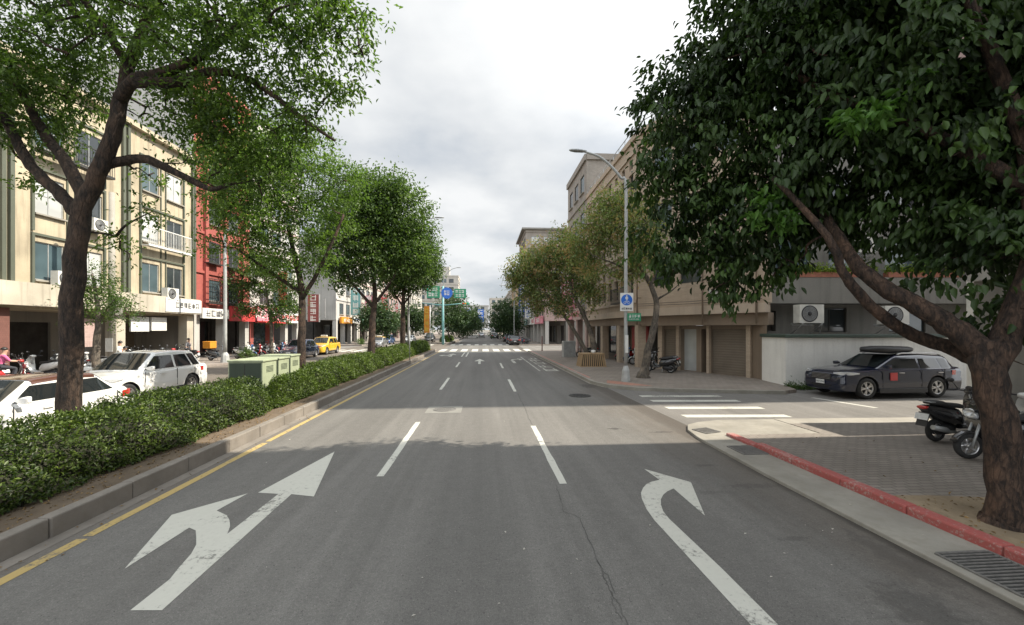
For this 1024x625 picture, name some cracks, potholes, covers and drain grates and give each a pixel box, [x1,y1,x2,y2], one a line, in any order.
crack [556,489,628,625]
drain grate [934,550,1024,598]
drain grate [727,445,769,455]
